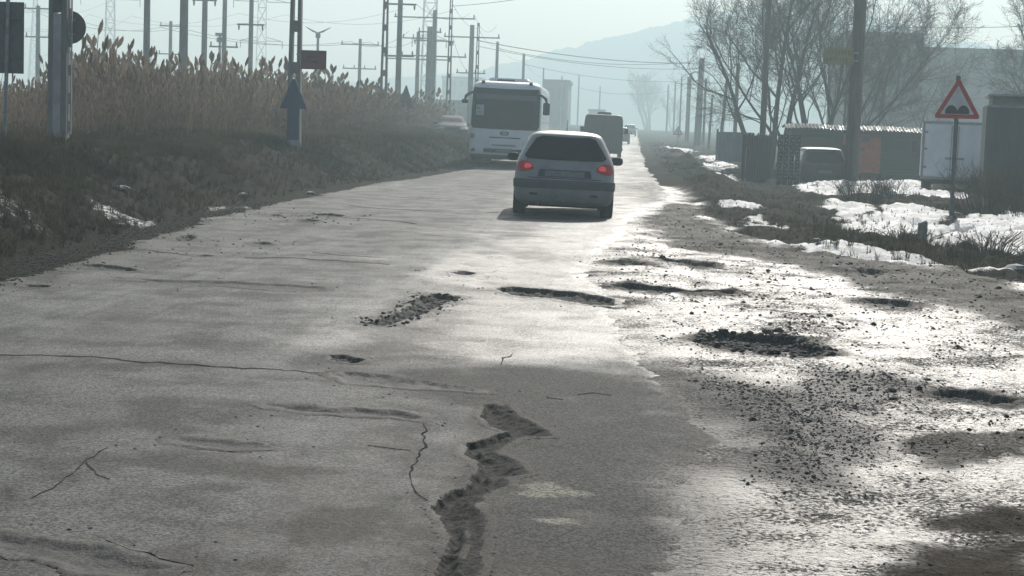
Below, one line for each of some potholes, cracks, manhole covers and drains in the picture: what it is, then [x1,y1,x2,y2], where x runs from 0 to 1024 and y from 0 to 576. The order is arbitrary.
pothole [855,298,926,309]
crack [368,424,428,501]
pothole [321,353,373,365]
pothole [923,387,1024,409]
pothole [689,331,838,357]
pothole [603,280,745,296]
pothole [420,402,561,576]
pothole [356,293,468,327]
crack [30,447,109,499]
pothole [487,286,627,308]
crack [106,540,194,566]
crack [0,354,318,373]
